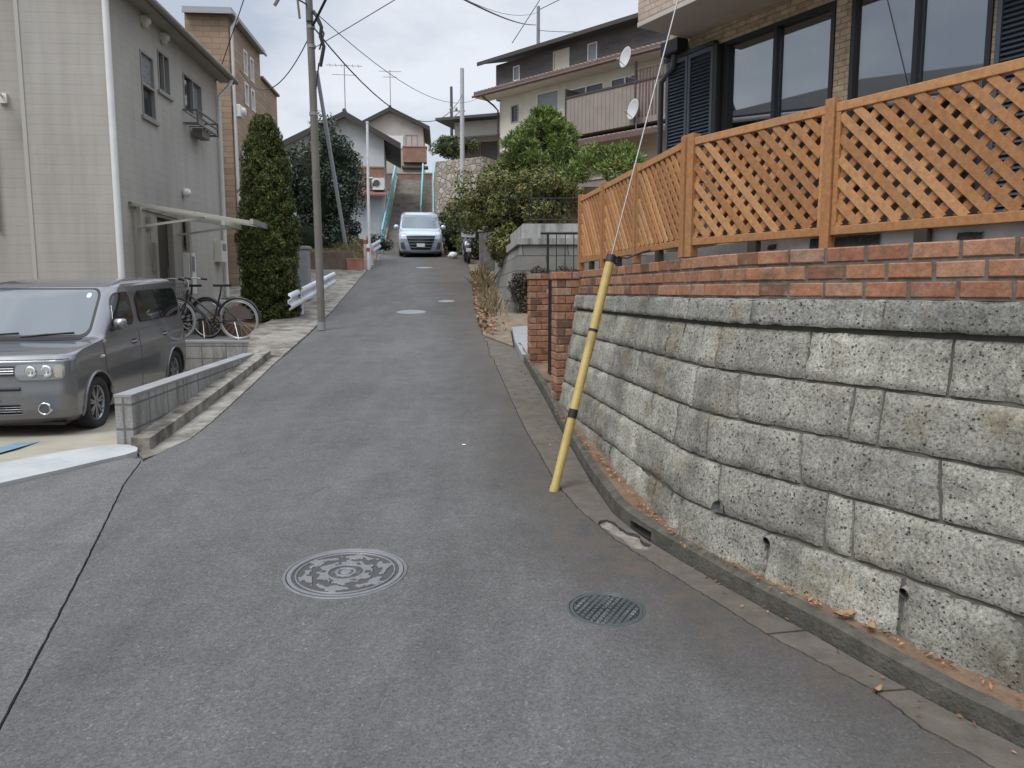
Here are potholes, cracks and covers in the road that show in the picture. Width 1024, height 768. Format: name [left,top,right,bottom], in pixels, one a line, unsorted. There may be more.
manhole cover [567,591,646,627]
manhole cover [282,548,408,599]
